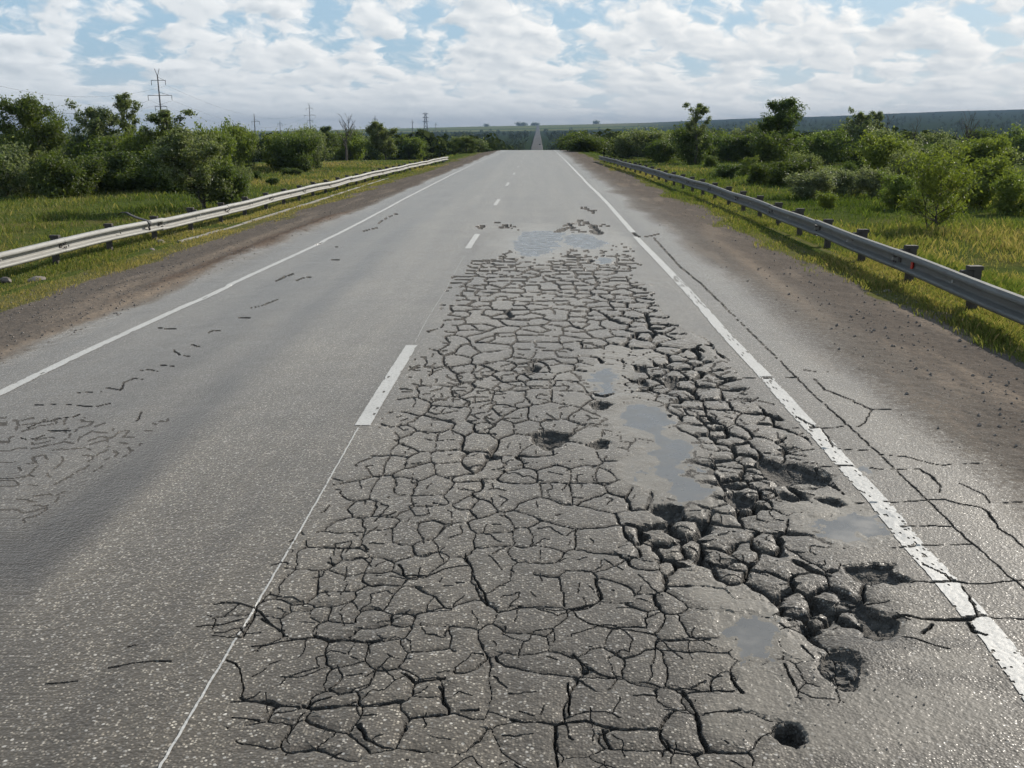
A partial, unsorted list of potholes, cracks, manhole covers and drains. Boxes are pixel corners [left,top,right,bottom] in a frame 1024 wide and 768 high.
pothole [843,563,912,589]
pothole [814,497,846,508]
pothole [755,458,832,487]
pothole [817,651,862,692]
pothole [589,400,613,411]
crack [0,207,1024,768]
pothole [779,492,804,503]
pothole [827,589,901,641]
pothole [531,431,570,453]
pothole [771,723,807,749]
